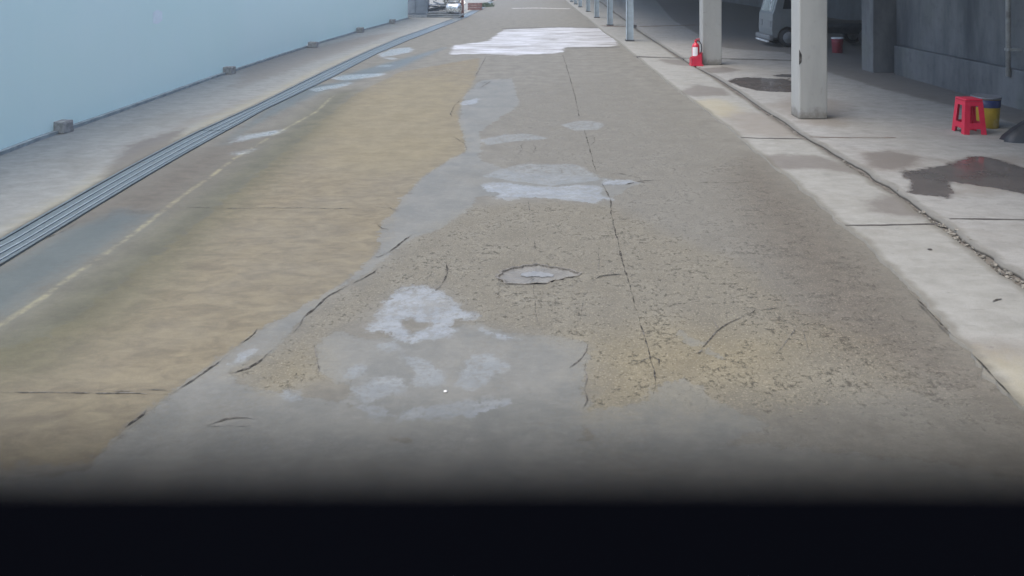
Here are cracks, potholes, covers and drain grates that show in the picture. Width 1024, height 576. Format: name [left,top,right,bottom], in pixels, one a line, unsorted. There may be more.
drain grate [0,130,227,266]
crack [692,302,849,354]
crack [563,56,746,393]
pothole [495,263,583,284]
